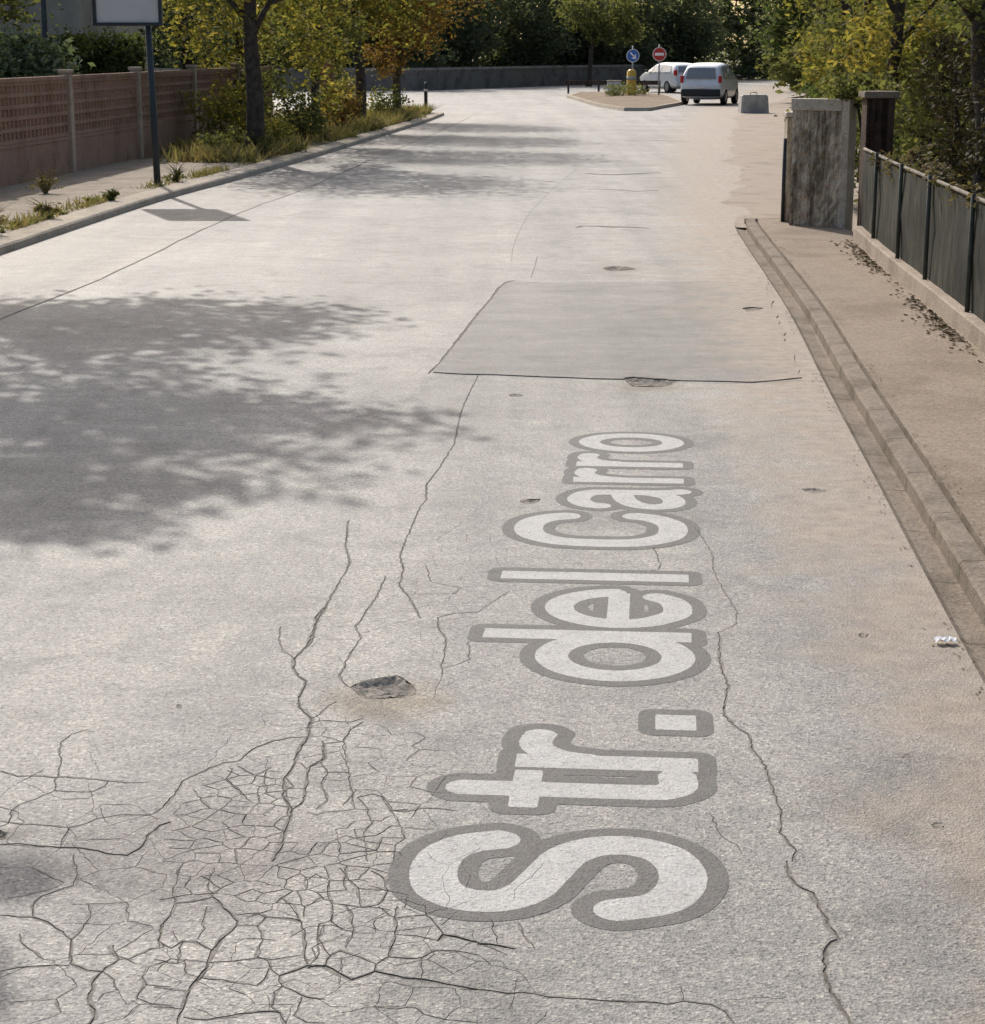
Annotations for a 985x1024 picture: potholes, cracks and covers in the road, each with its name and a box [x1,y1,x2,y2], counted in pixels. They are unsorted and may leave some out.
pothole [625,378,679,387]
crack [0,376,854,1024]
pothole [351,675,417,699]
